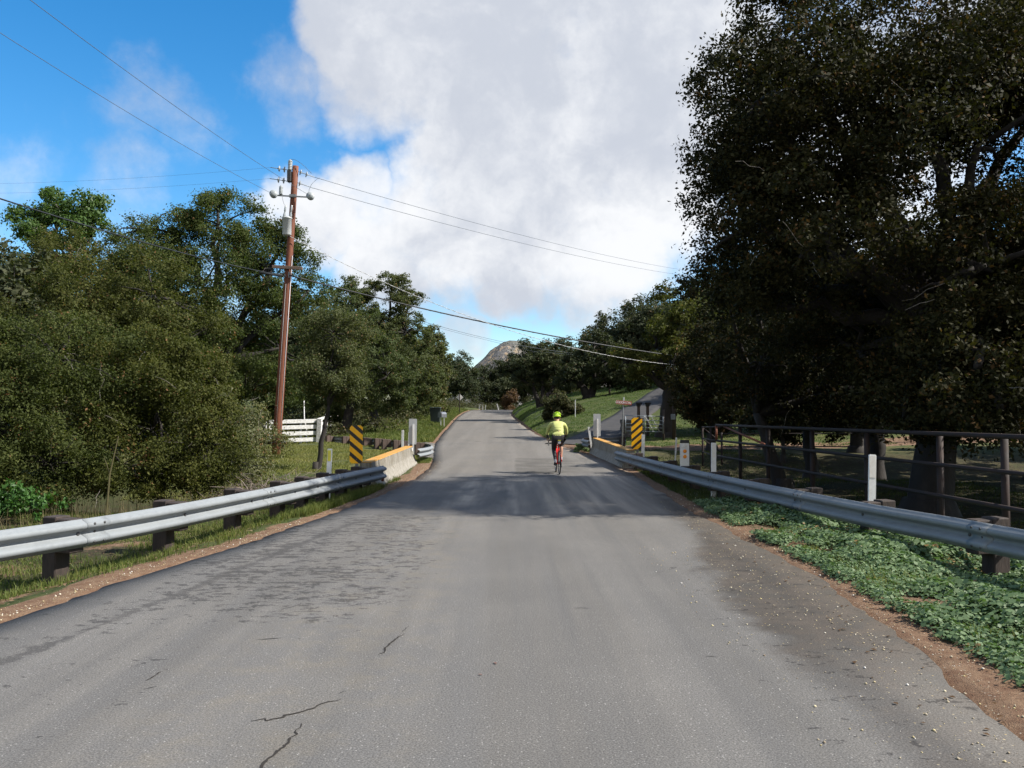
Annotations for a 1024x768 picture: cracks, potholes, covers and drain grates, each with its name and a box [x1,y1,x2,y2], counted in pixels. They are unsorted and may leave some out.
crack [251,691,343,768]
